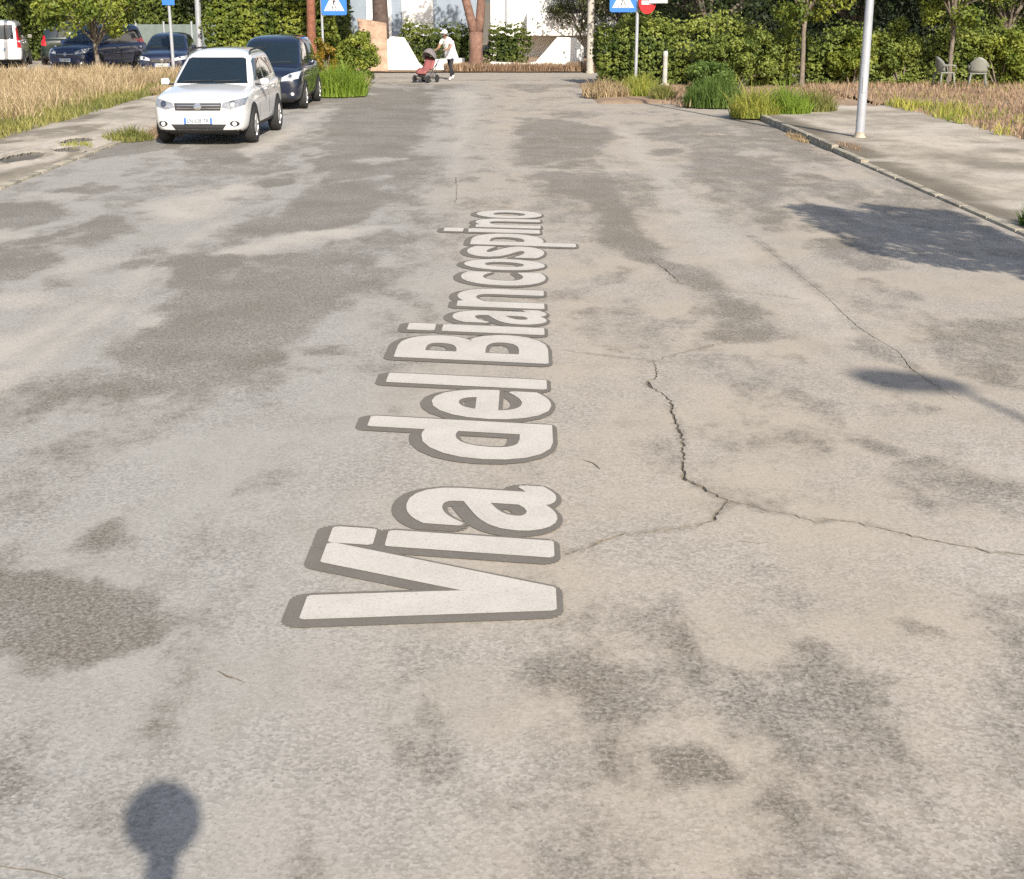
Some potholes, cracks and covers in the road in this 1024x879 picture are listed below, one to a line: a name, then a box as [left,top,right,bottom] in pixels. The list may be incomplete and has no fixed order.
pothole [0,152,46,163]
crack [751,237,954,398]
crack [565,336,1024,556]
